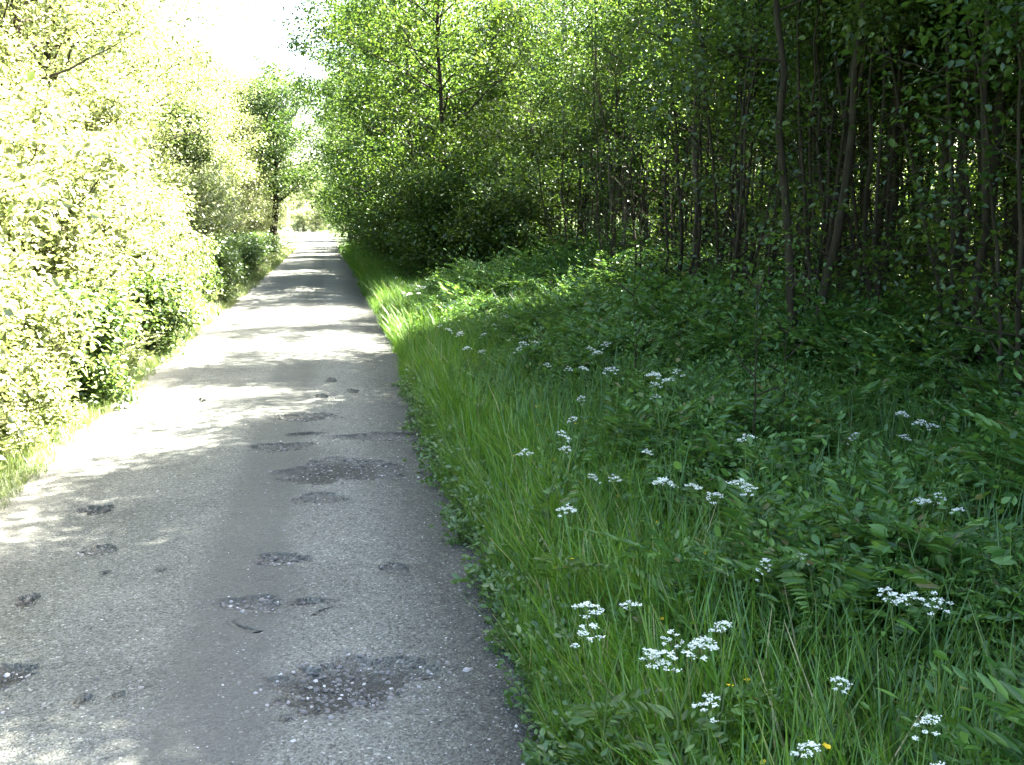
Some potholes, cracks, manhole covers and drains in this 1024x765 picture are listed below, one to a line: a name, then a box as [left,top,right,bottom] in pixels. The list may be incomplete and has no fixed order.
pothole [281,596,337,608]
pothole [0,658,48,693]
pothole [259,448,421,490]
pothole [71,504,116,517]
pothole [249,552,319,567]
pothole [376,562,414,576]
pothole [73,543,122,558]
pothole [67,691,98,709]
pothole [11,592,45,610]
crack [226,621,264,633]
pothole [287,490,352,505]
pothole [264,412,350,425]
